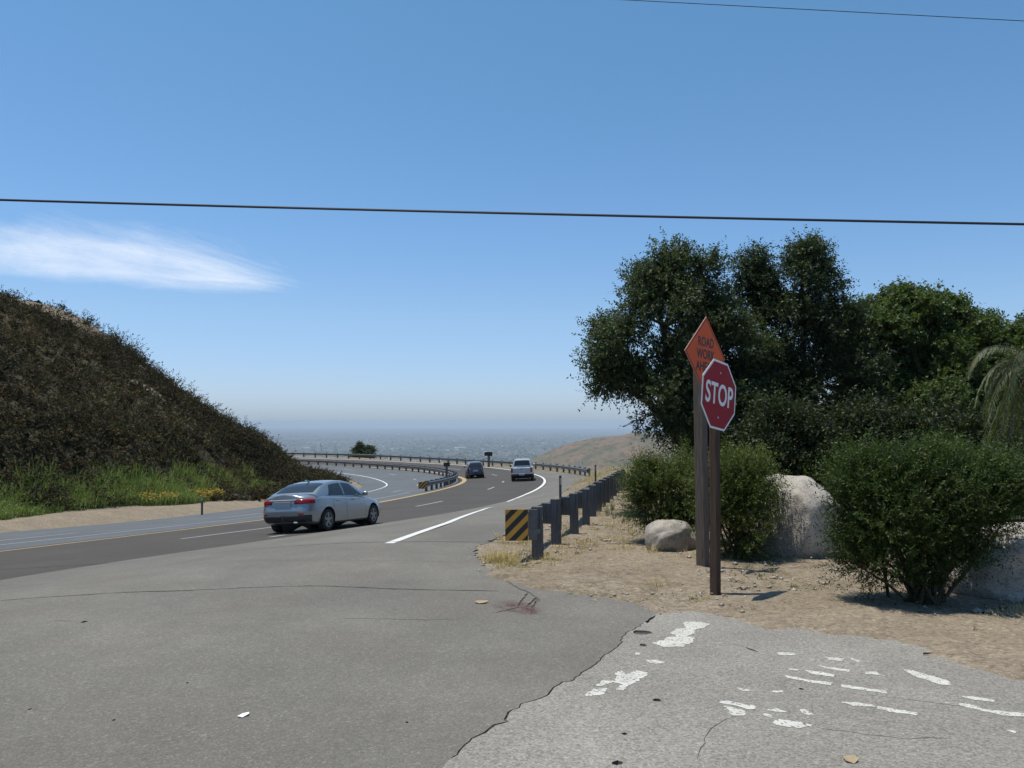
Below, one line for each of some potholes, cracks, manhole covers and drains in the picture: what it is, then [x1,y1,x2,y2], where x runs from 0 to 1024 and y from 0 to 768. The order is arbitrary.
crack [495,581,540,614]
crack [452,615,656,758]
